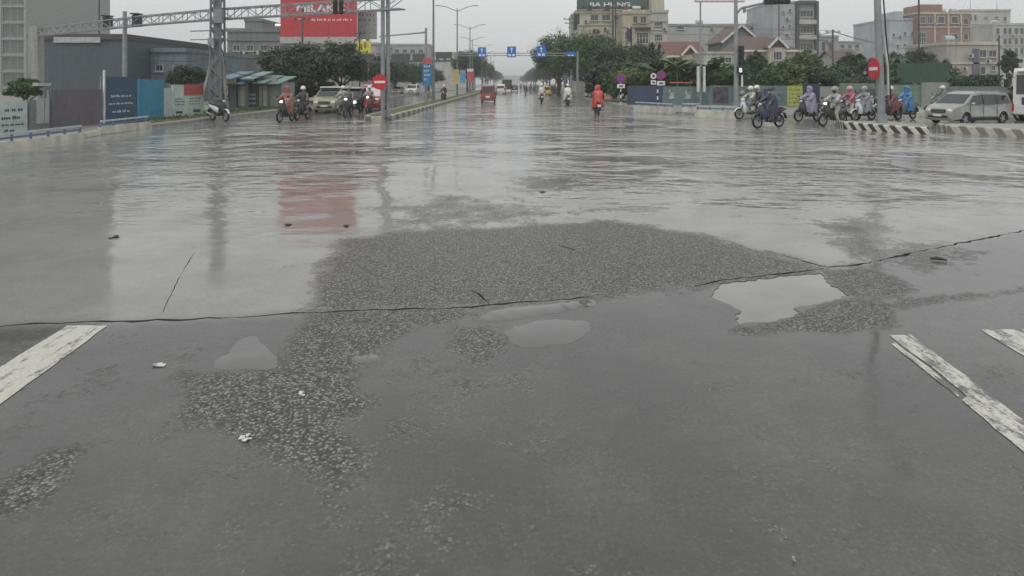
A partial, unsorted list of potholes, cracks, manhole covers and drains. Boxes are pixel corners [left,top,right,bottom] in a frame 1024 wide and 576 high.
crack [694,230,1024,286]
pothole [711,273,849,324]
crack [0,254,585,327]
